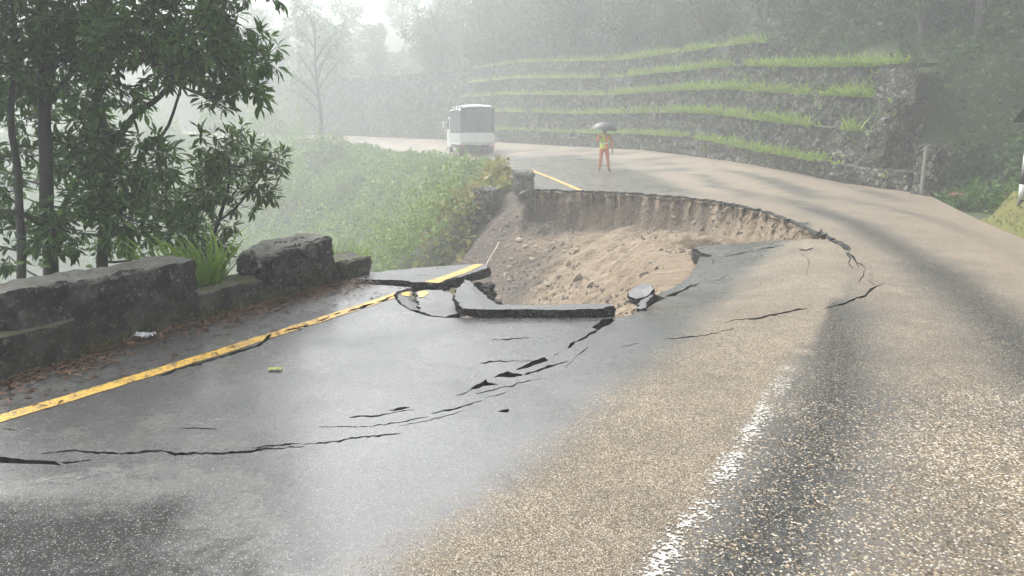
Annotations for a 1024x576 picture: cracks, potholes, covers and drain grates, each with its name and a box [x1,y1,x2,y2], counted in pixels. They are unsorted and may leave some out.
crack [0,251,884,465]
crack [692,245,782,281]
